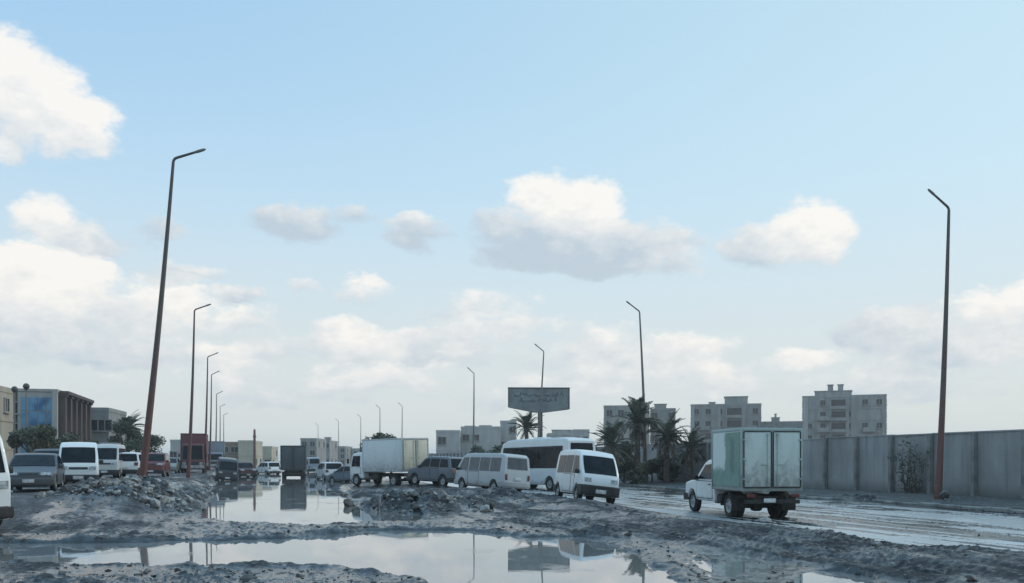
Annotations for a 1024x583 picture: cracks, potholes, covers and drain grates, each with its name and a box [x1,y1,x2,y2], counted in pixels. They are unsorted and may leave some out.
pothole [0,523,706,583]
pothole [779,560,896,583]
